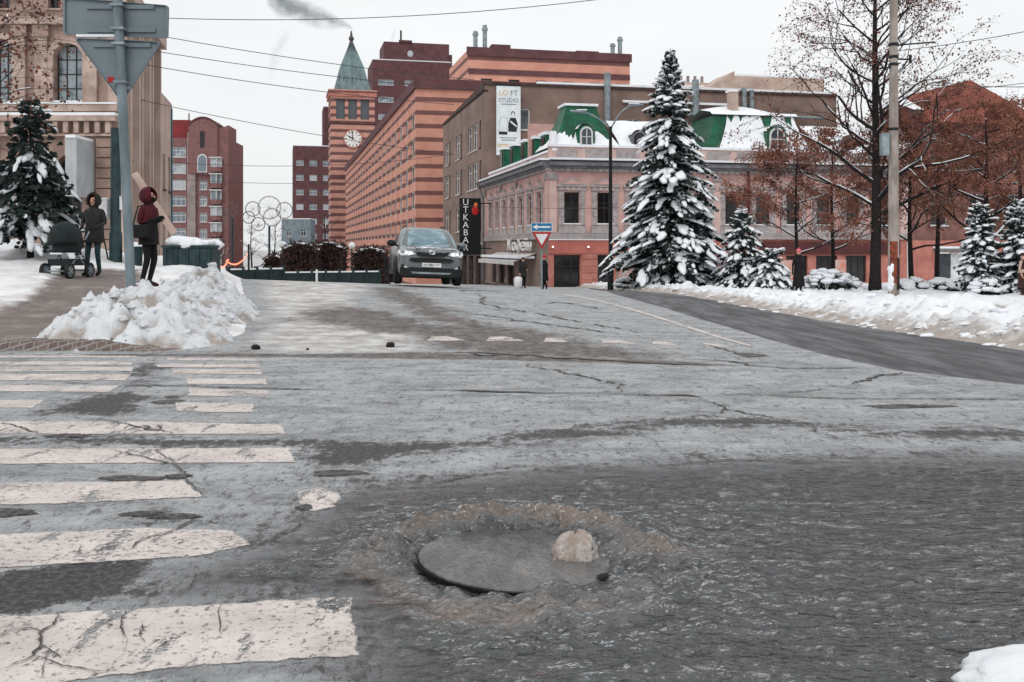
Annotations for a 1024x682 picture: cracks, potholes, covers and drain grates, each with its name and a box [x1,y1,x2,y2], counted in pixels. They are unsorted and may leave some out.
crack [105,419,172,433]
crack [706,344,914,384]
manhole cover [417,531,615,600]
crack [456,290,656,336]
crack [526,362,842,440]
crack [0,570,221,676]
crack [114,449,216,501]
